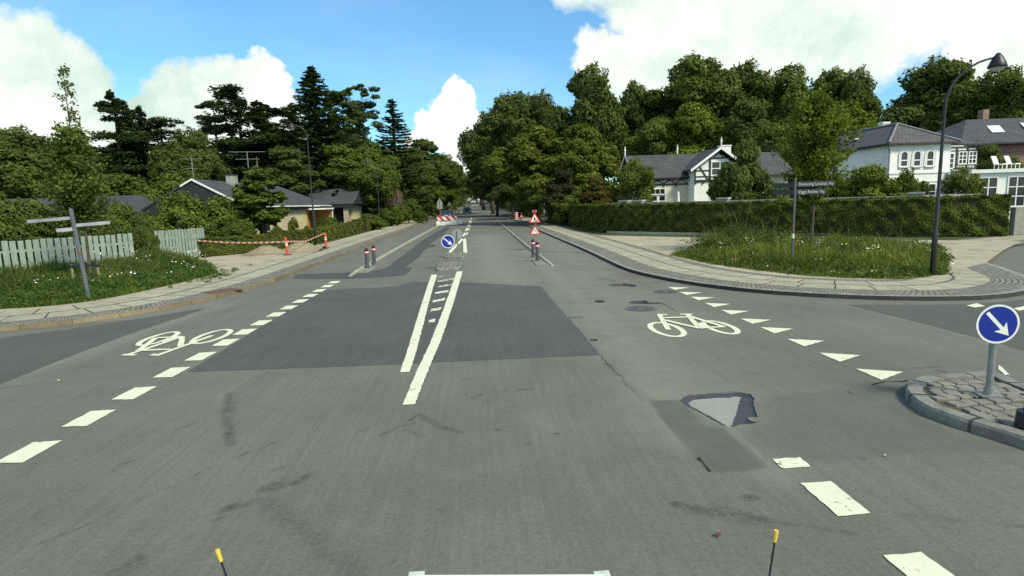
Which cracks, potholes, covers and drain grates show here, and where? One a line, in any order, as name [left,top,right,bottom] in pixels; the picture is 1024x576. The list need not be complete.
pothole [680,392,758,427]
